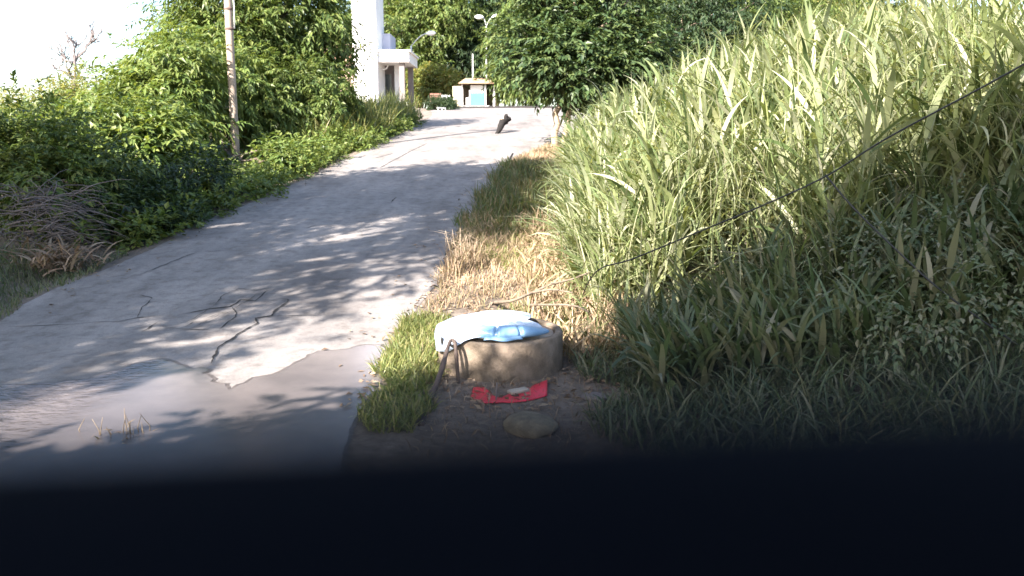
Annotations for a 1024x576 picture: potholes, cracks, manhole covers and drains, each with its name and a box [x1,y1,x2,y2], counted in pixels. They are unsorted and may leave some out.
crack [8,288,304,363]
